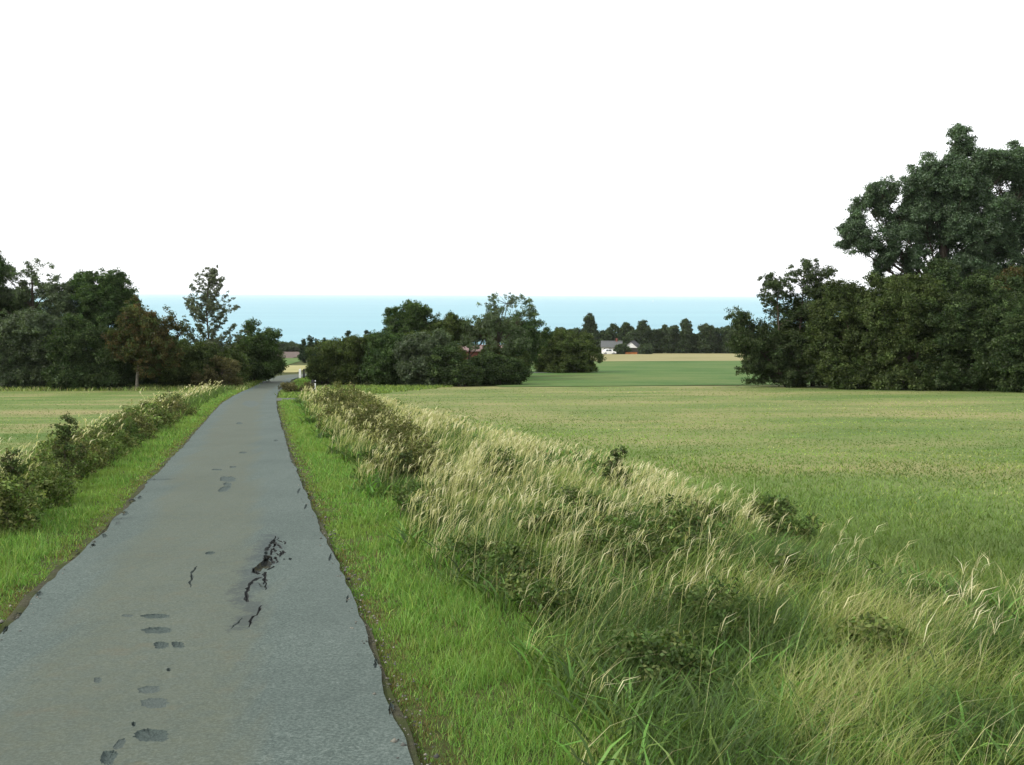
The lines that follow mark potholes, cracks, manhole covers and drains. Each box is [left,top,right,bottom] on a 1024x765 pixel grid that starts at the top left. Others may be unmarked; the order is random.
pothole [140,698,170,708]
crack [231,536,286,629]
pothole [132,728,169,742]
pothole [100,750,118,765]
